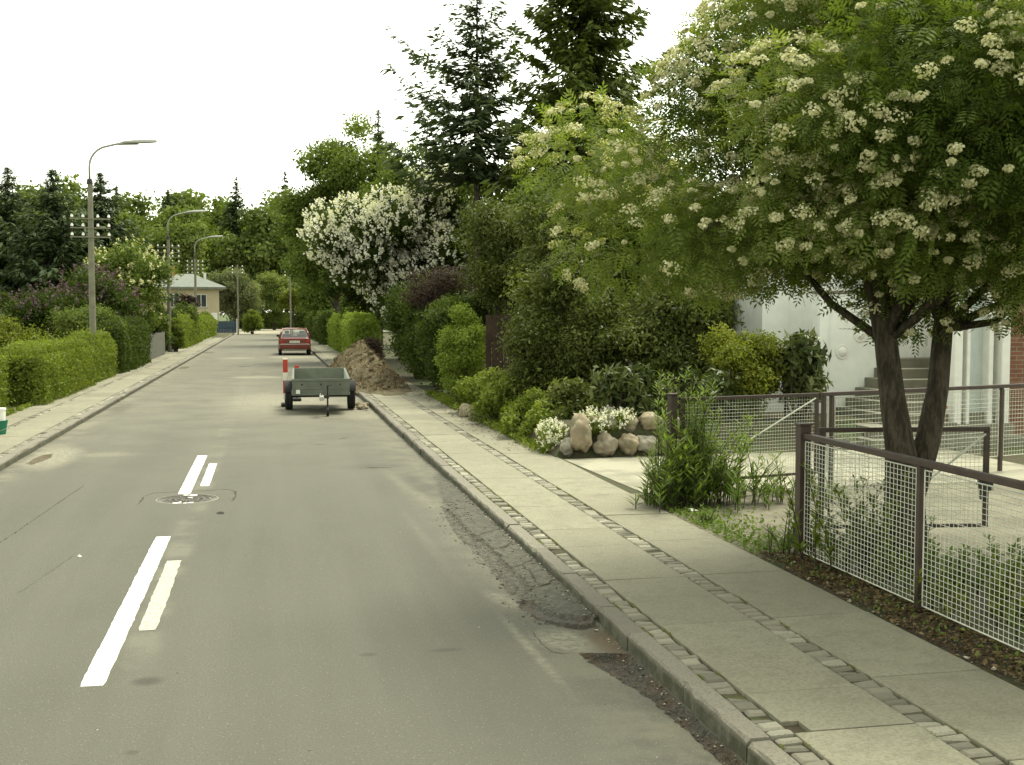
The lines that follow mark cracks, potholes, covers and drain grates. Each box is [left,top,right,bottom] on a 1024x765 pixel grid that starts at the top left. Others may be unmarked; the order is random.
crack [0,486,83,543]
manhole cover [155,494,219,504]
crack [483,528,555,587]
pothole [516,600,600,630]
